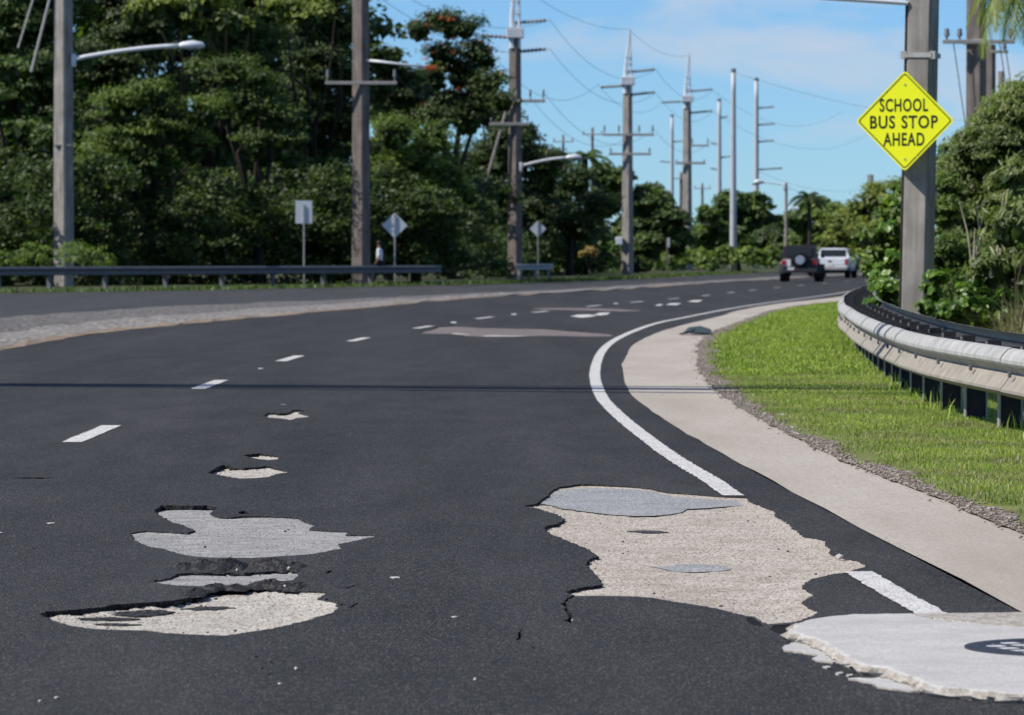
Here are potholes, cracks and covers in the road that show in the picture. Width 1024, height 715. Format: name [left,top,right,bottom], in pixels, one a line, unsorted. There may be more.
pothole [153,557,307,586]
pothole [130,505,375,558]
pothole [526,484,866,624]
pothole [40,578,343,635]
crack [561,596,575,624]
pothole [263,410,309,420]
pothole [208,465,287,479]
